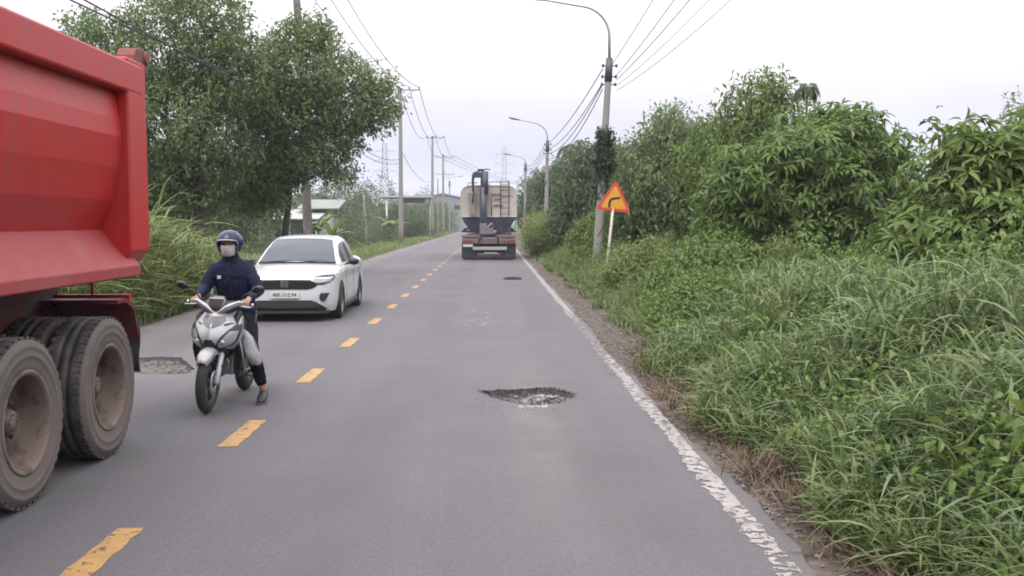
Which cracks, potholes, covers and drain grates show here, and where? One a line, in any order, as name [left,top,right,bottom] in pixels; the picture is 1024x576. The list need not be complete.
pothole [136,357,195,374]
